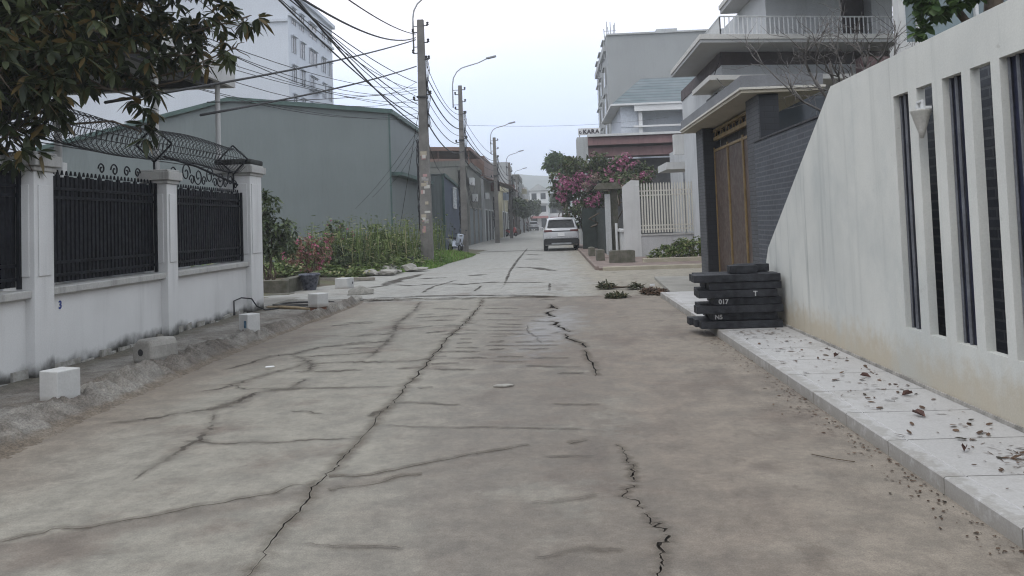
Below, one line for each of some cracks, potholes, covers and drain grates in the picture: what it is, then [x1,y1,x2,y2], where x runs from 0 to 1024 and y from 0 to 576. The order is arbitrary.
crack [8,249,597,576]
crack [617,445,671,576]
